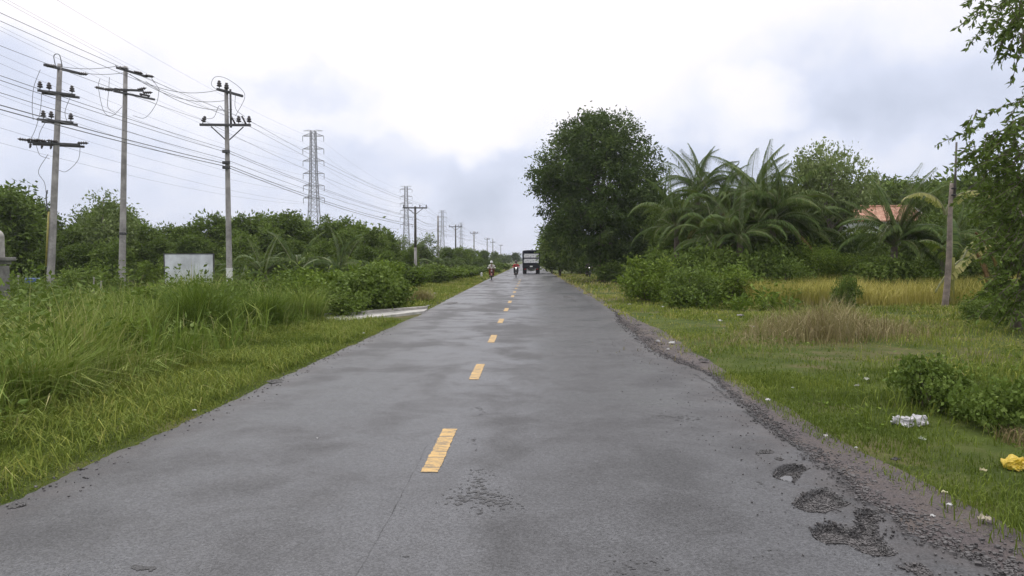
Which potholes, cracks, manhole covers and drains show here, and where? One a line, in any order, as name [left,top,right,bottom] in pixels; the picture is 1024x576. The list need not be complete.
pothole [809,507,898,557]
pothole [773,463,811,483]
pothole [791,486,851,514]
